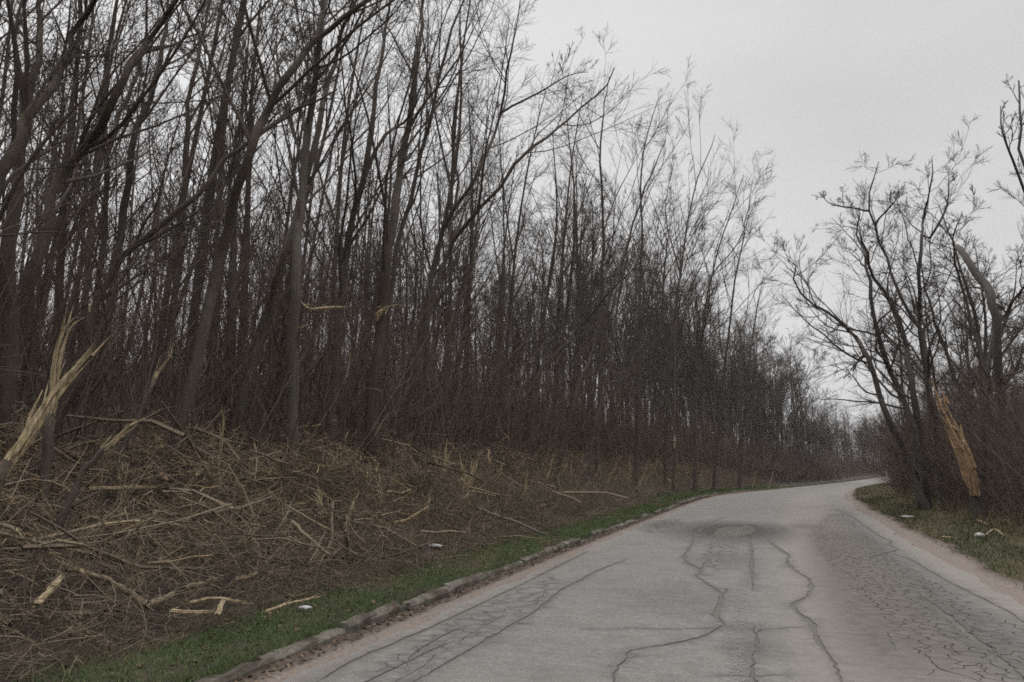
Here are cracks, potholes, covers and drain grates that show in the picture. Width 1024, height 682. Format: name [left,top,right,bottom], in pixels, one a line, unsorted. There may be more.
crack [365,510,1024,682]
